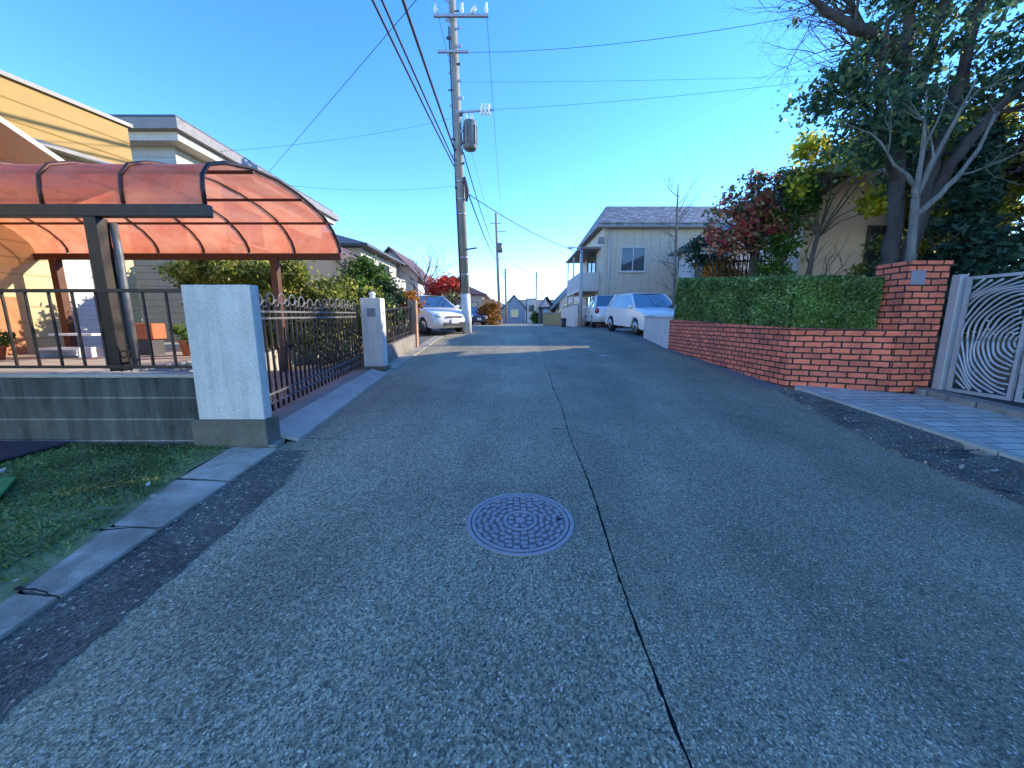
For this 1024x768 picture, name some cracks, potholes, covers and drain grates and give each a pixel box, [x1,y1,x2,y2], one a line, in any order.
manhole cover [467,493,574,557]
crack [544,363,693,768]
